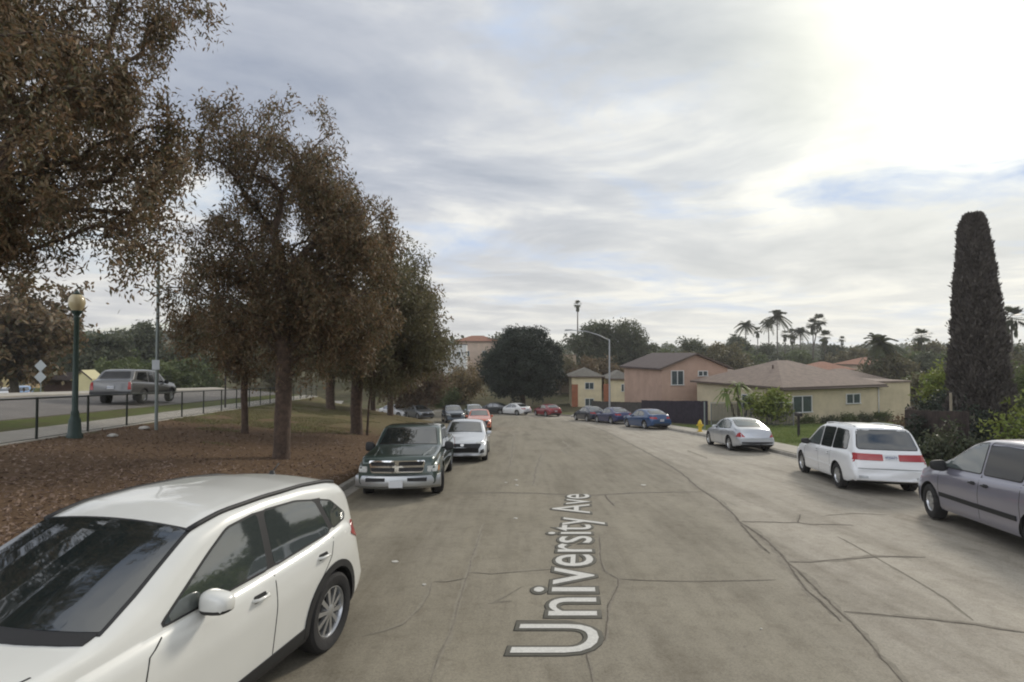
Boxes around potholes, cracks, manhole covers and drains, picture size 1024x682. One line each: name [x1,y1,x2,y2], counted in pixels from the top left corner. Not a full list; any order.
crack [452,426,1024,682]
